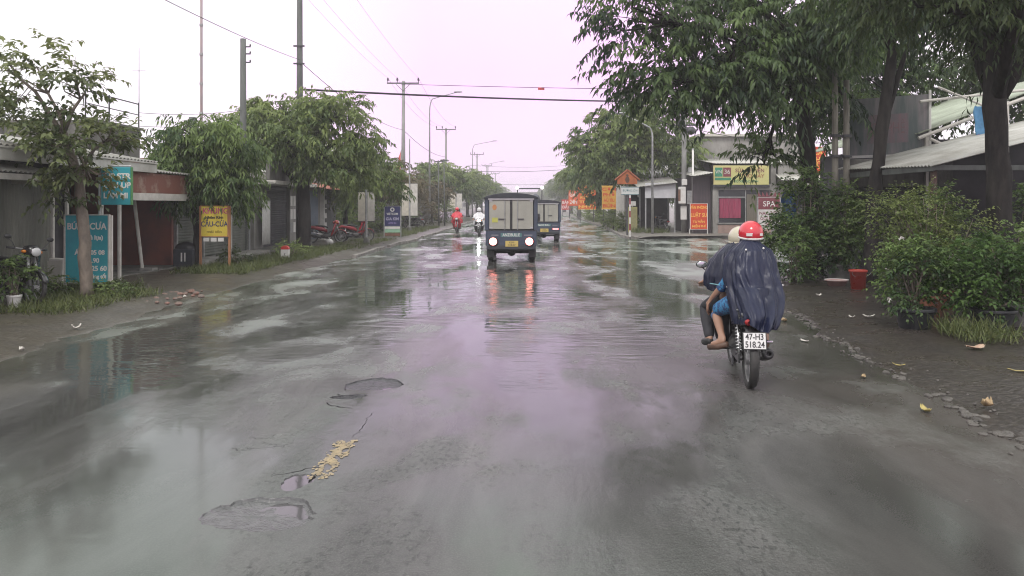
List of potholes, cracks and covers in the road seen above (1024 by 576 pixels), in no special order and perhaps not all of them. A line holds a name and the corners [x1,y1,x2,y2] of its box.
pothole [281,474,316,491]
pothole [198,497,318,532]
pothole [344,376,404,391]
